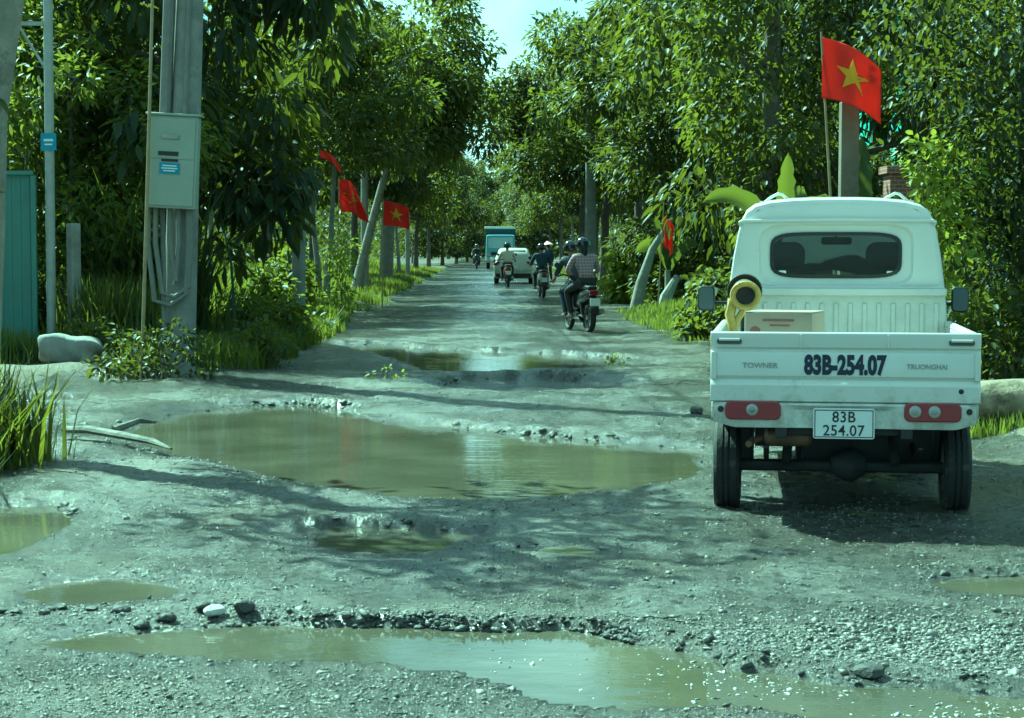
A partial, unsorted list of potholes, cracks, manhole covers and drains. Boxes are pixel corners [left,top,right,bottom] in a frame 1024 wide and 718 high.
pothole [126,397,713,500]
pothole [0,500,85,556]
pothole [441,369,621,391]
pothole [9,607,1024,718]
pothole [14,576,191,605]
pothole [344,340,642,371]
pothole [907,568,1024,596]
pothole [303,515,484,555]
